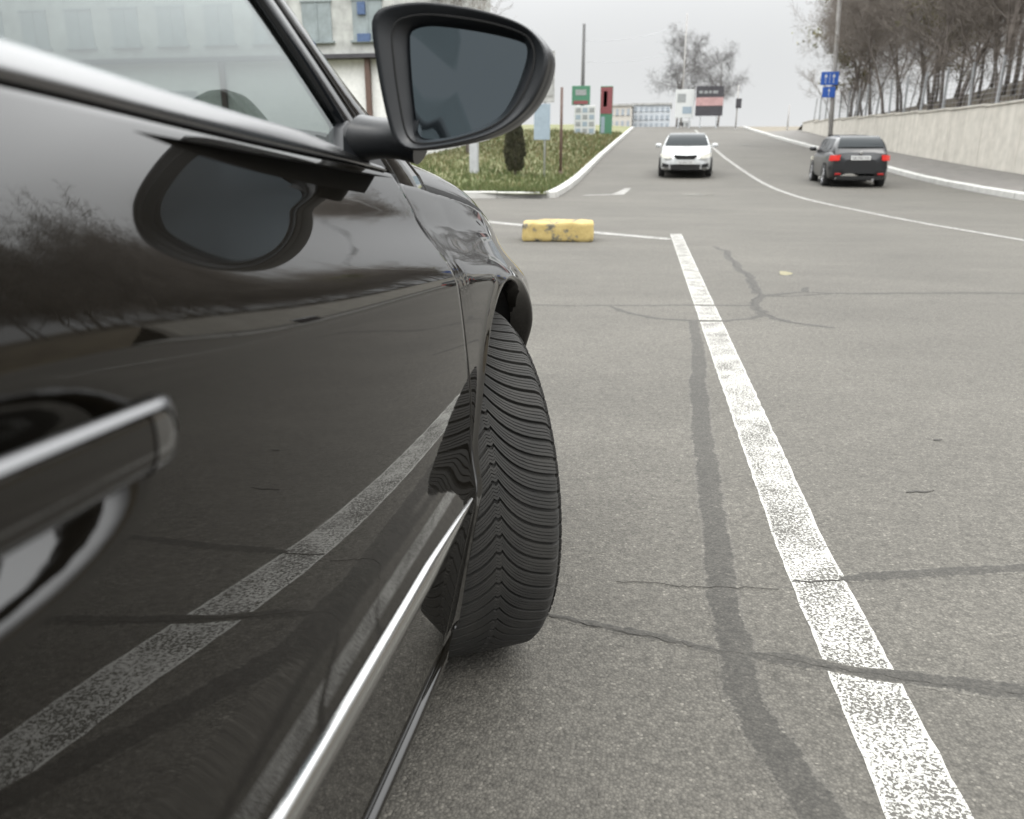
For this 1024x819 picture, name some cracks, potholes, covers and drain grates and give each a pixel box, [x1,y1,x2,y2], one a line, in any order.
crack [548,613,1024,702]
crack [616,581,779,590]
crack [548,246,1024,328]
